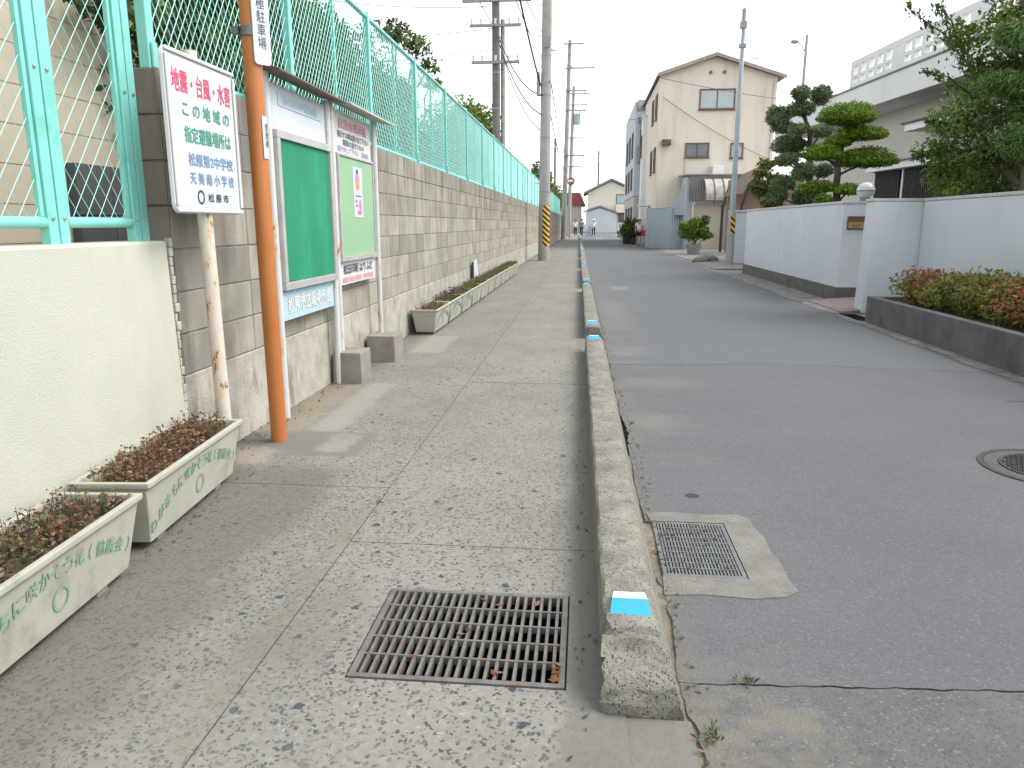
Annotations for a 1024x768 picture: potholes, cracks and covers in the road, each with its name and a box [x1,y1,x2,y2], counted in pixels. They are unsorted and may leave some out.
crack [619,414,629,456]
manhole cover [977,449,1024,482]
drain grate [346,588,568,690]
drain grate [646,512,799,600]
crack [700,684,1024,693]
